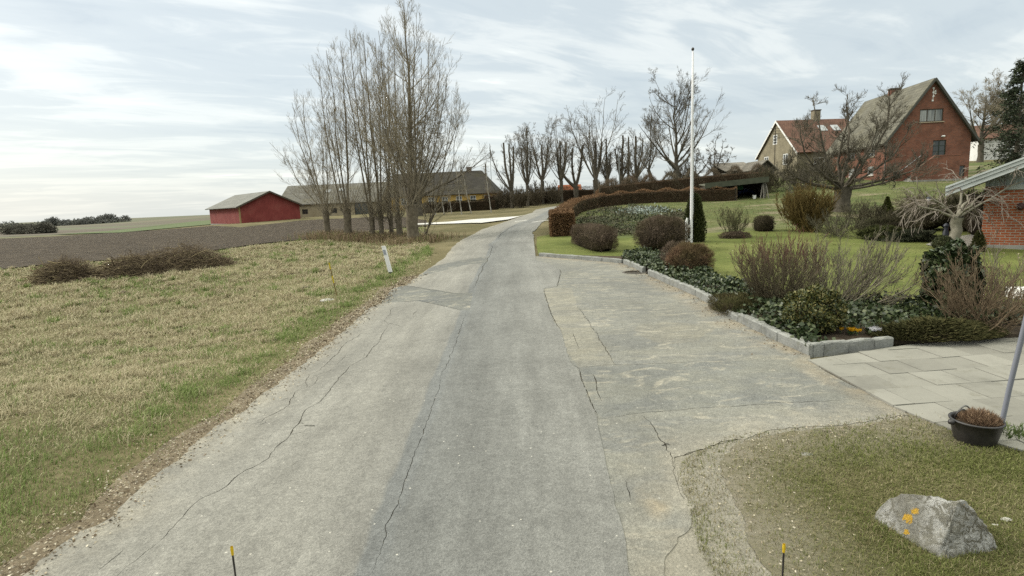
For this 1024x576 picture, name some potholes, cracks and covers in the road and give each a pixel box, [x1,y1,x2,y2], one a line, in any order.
crack [380,385,440,554]
crack [646,419,738,491]
crack [100,310,414,576]
